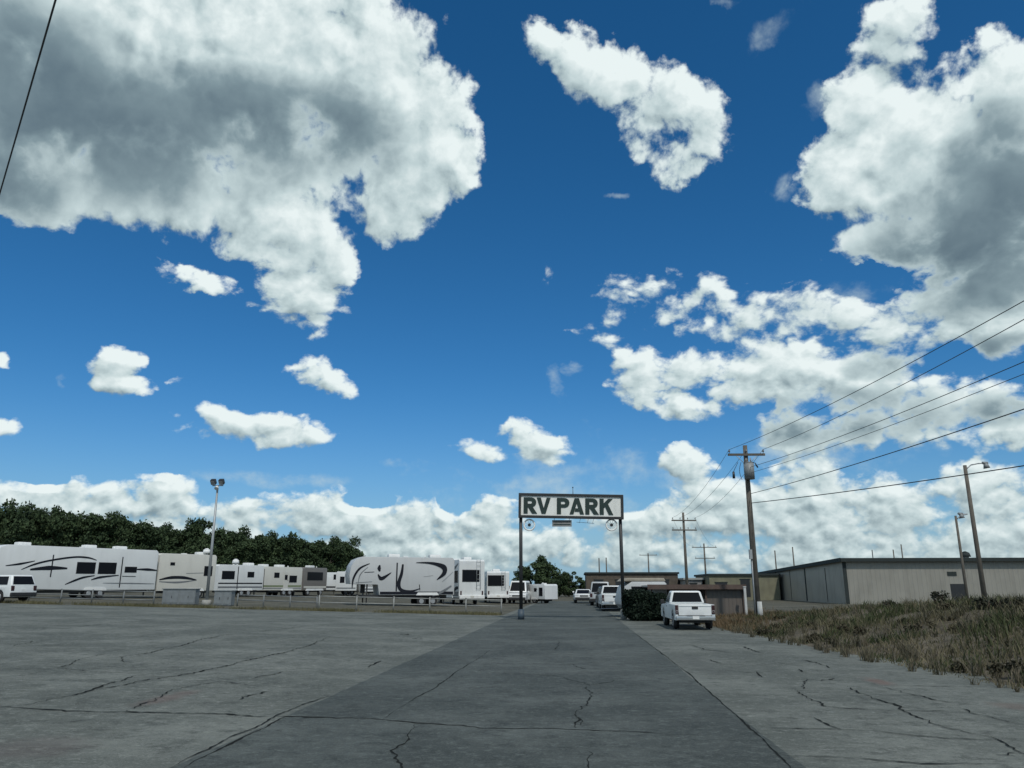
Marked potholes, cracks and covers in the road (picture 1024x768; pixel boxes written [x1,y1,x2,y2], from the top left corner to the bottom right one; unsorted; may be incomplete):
crack [0,619,661,768]
crack [784,659,1024,765]
